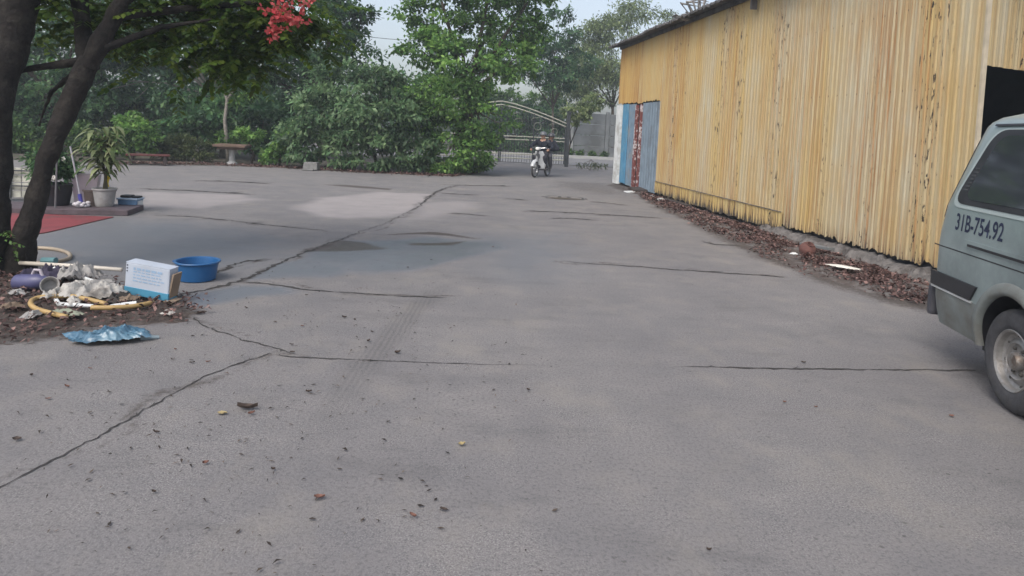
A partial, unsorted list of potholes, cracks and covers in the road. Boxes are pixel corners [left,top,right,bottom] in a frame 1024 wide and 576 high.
crack [0,318,294,487]
crack [167,185,457,298]
